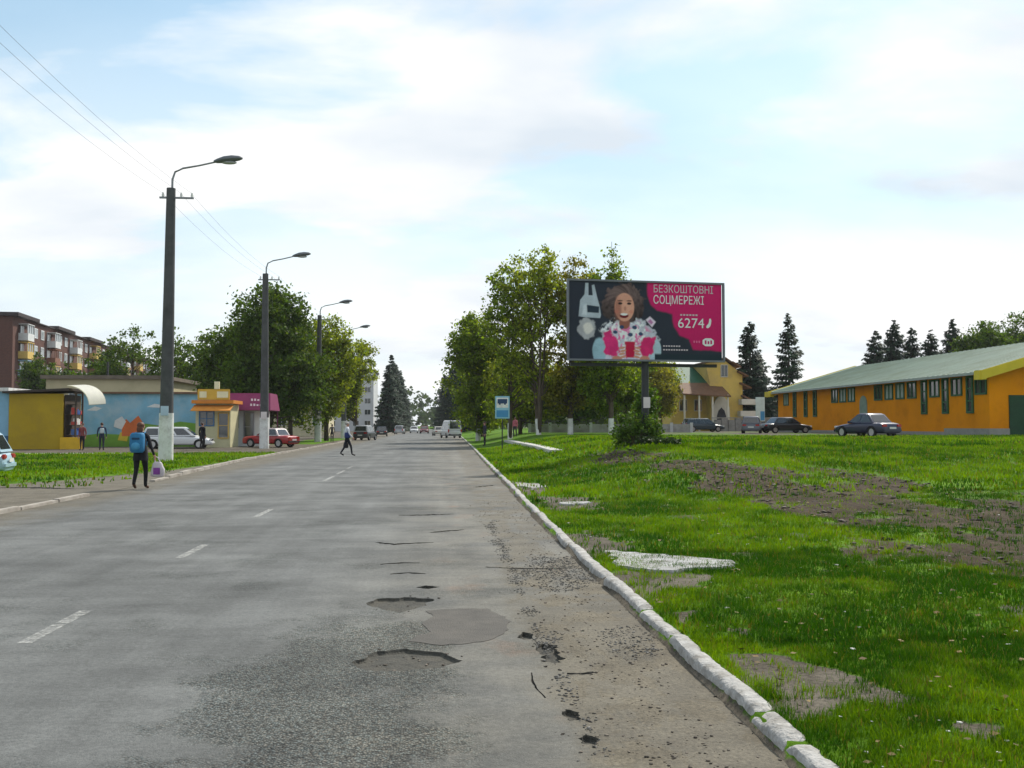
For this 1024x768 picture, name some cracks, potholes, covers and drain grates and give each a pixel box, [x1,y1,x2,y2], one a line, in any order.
pothole [578,735,599,745]
pothole [352,649,463,671]
pothole [562,709,581,721]
pothole [366,597,434,613]
crack [531,673,546,698]
pothole [535,644,566,665]
